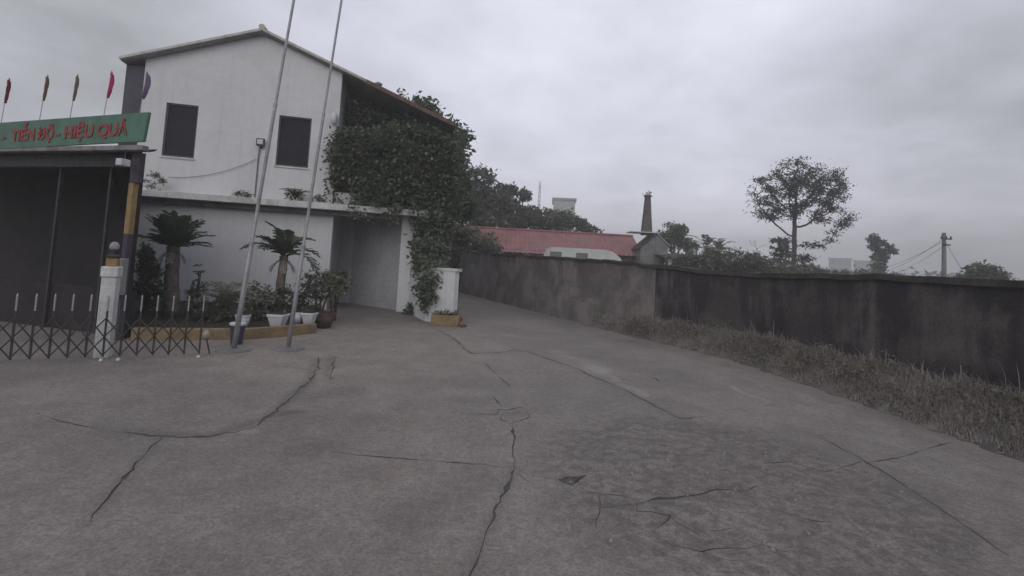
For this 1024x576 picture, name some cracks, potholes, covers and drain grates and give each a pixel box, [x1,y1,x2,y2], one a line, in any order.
crack [760,435,1009,556]
crack [37,357,336,522]
crack [332,330,697,576]
pothole [558,475,586,486]
crack [586,485,830,564]
